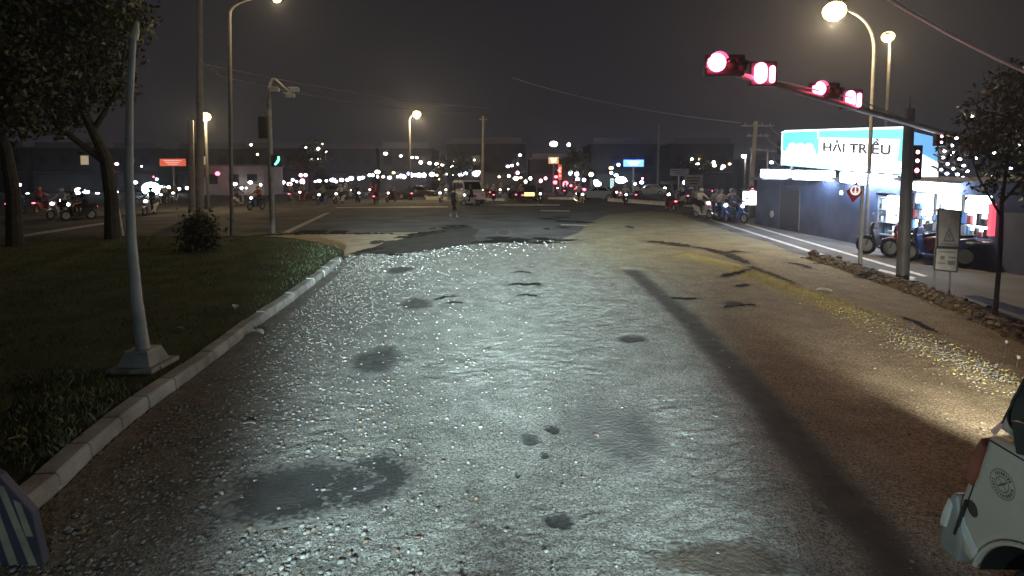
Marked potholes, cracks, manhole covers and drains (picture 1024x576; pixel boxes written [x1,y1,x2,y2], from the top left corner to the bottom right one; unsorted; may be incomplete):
crack [509,271,542,296]
crack [647,240,822,287]
pothole [542,512,576,533]
pothole [615,335,649,344]
crack [902,316,939,332]
pothole [520,434,543,448]
pothole [543,425,563,436]
